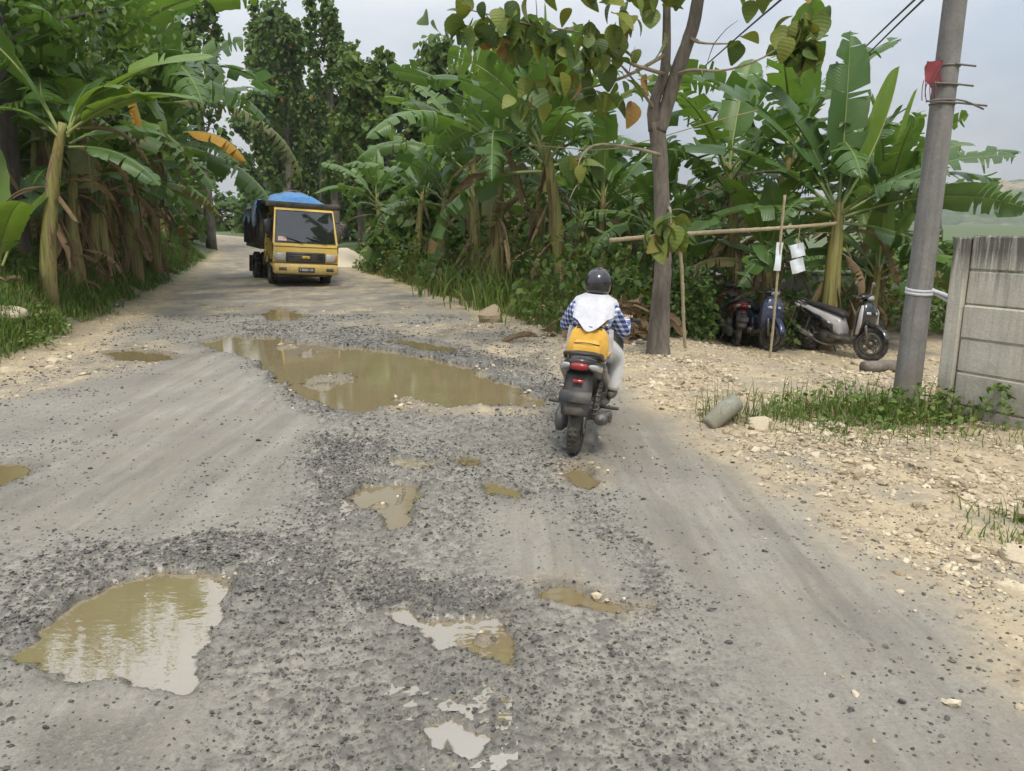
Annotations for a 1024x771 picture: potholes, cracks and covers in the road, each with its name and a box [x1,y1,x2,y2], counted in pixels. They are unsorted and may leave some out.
pothole [0,458,42,490]
pothole [373,601,530,670]
pothole [414,711,502,766]
pothole [196,333,558,414]
pothole [381,455,446,471]
pothole [96,347,181,363]
pothole [532,579,636,616]
pothole [0,560,244,697]
pothole [255,306,313,322]
pothole [557,462,606,490]
pothole [475,477,526,500]
pothole [341,478,430,532]
